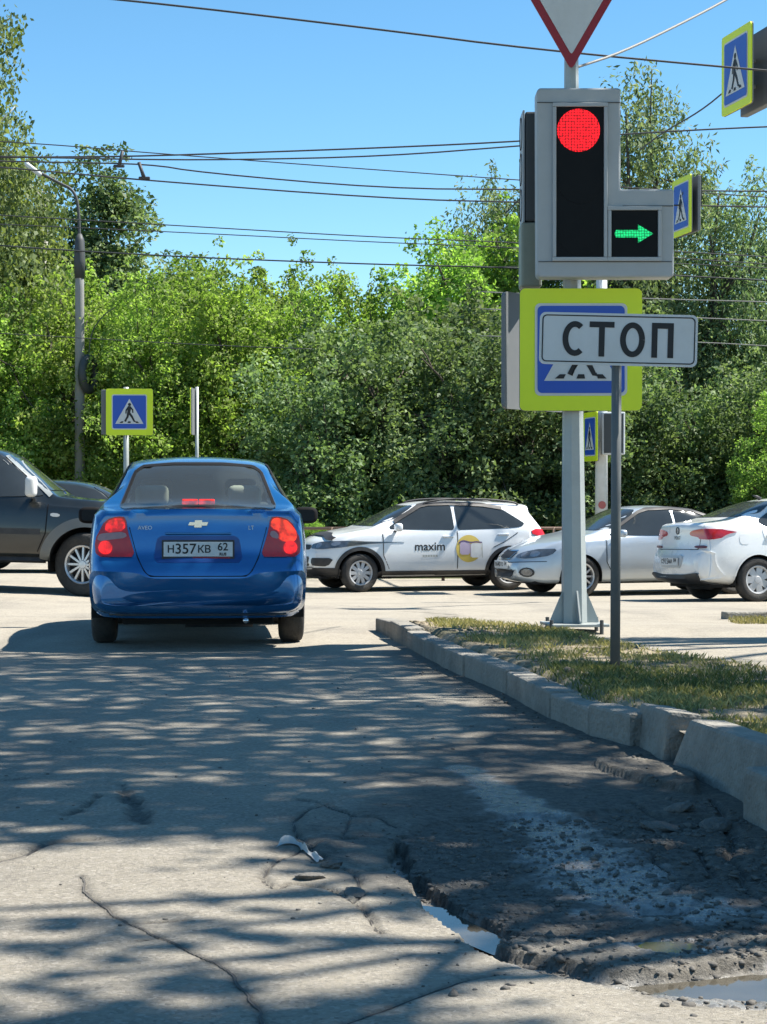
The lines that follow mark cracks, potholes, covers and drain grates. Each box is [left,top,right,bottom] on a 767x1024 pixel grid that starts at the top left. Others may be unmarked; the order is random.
crack [263,805,397,934]
crack [80,876,264,1024]
pothole [383,808,767,1011]
